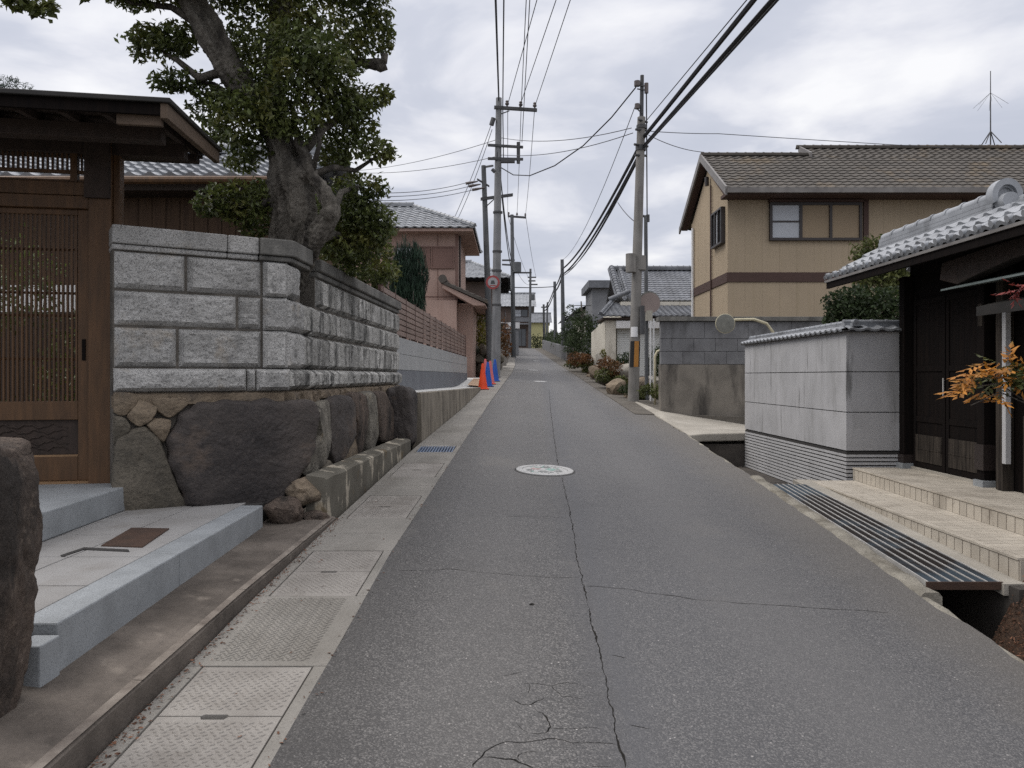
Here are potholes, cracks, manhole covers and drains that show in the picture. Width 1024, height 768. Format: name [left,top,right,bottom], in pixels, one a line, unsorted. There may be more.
drain grate [773,484,1003,590]
crack [472,672,613,768]
crack [595,586,885,613]
manhole cover [514,465,575,476]
utility cover [101,528,169,548]
crack [399,569,570,578]
